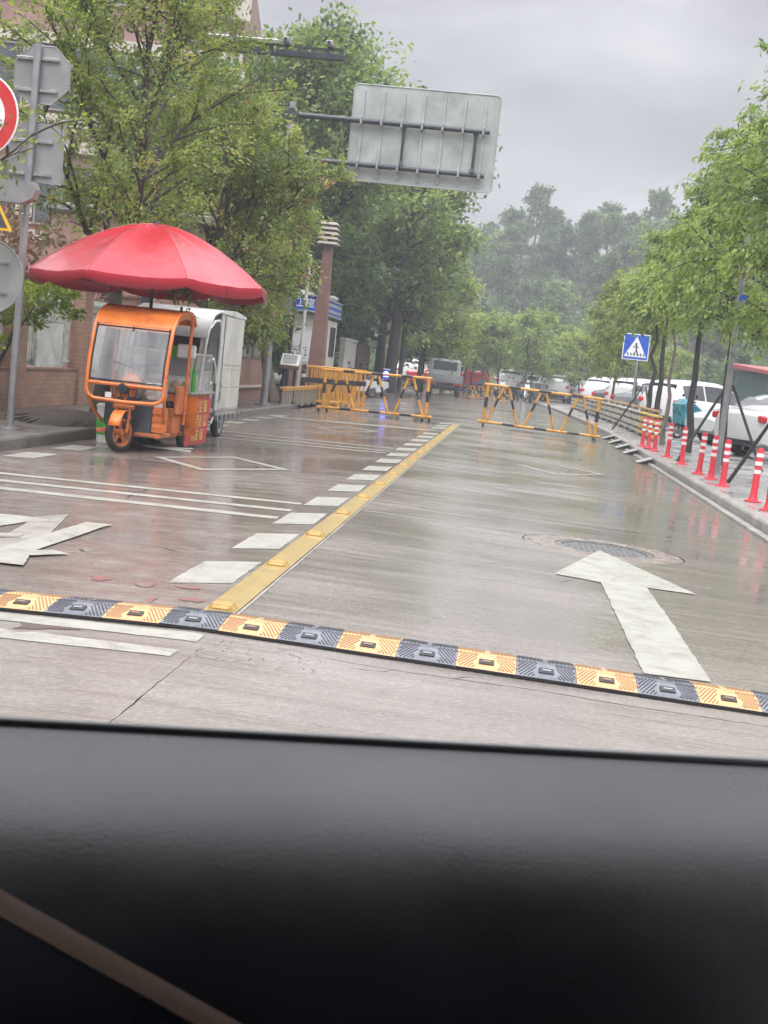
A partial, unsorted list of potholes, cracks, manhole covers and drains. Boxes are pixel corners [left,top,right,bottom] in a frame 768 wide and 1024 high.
crack [196,641,316,671]
manhole cover [528,535,682,564]
